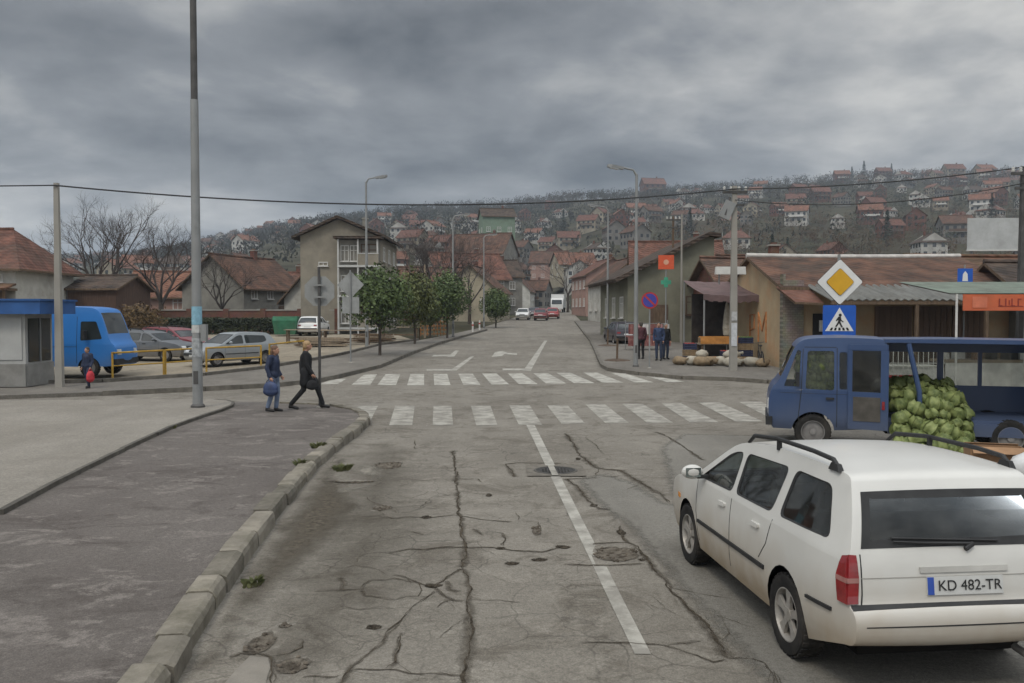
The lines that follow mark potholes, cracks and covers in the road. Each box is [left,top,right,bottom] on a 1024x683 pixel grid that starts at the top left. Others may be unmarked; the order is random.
pothole [276,655,309,674]
crack [505,432,703,509]
pothole [243,632,277,655]
crack [228,478,781,683]
manhole cover [526,465,587,476]
